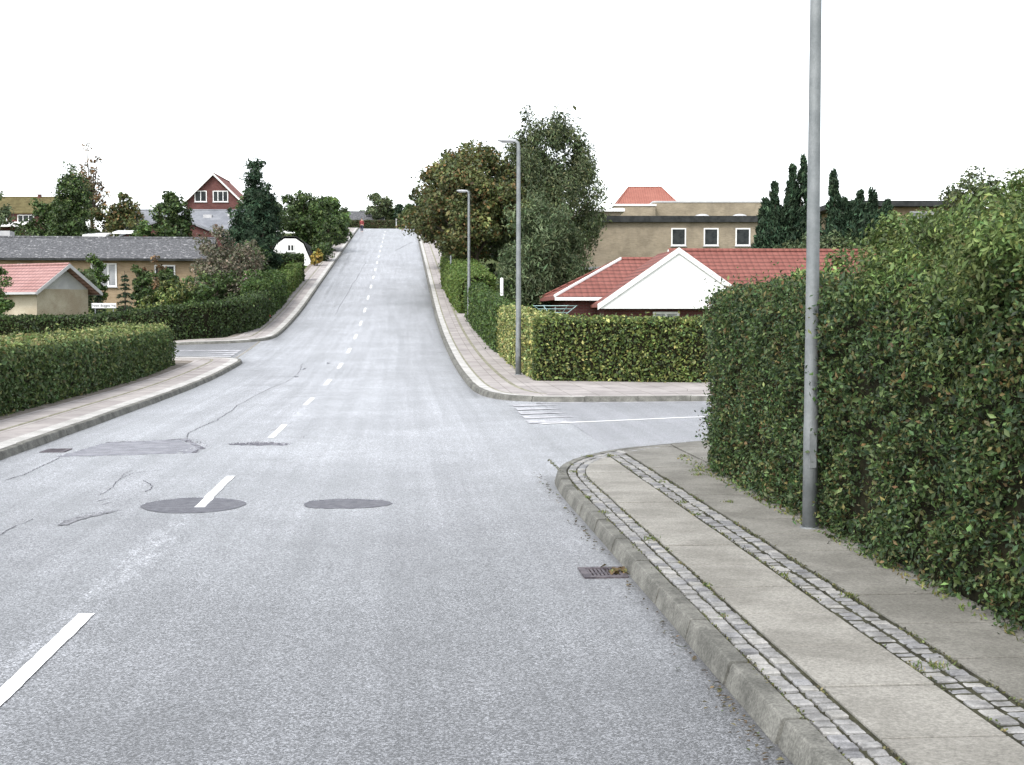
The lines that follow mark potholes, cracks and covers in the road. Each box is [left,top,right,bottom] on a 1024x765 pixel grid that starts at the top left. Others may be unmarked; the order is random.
drain grate [578,566,629,579]
